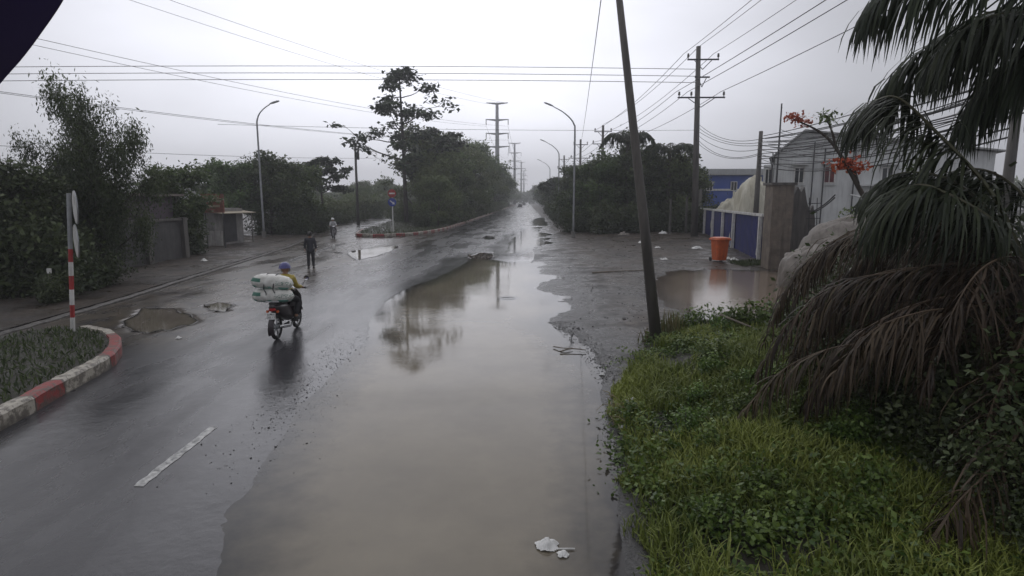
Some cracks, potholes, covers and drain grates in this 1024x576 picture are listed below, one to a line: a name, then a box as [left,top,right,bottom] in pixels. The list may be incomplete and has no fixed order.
pothole [203,302,235,312]
pothole [120,307,199,334]
